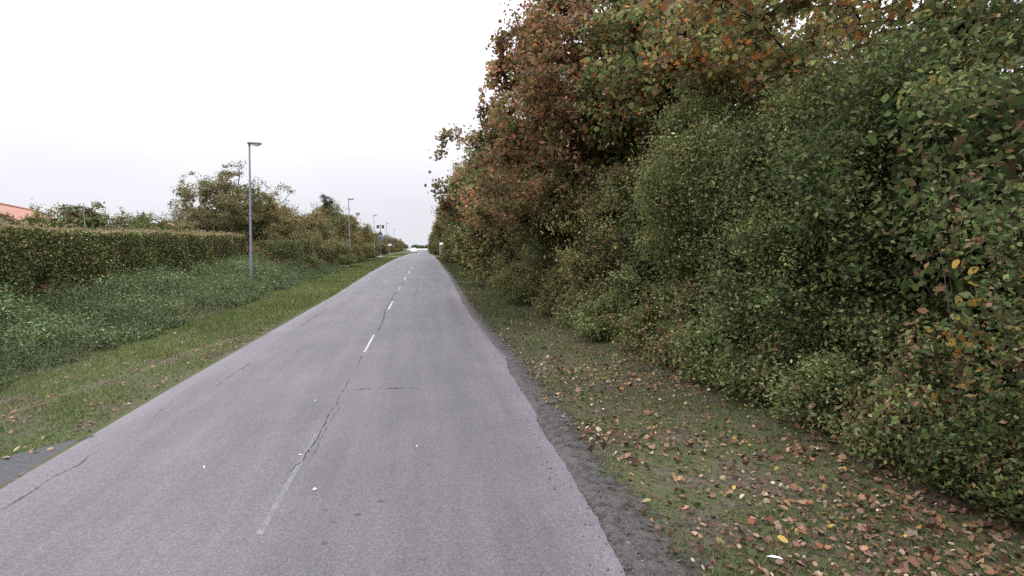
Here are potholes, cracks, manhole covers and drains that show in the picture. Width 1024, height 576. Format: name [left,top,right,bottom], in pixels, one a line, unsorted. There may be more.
crack [290,356,412,472]
